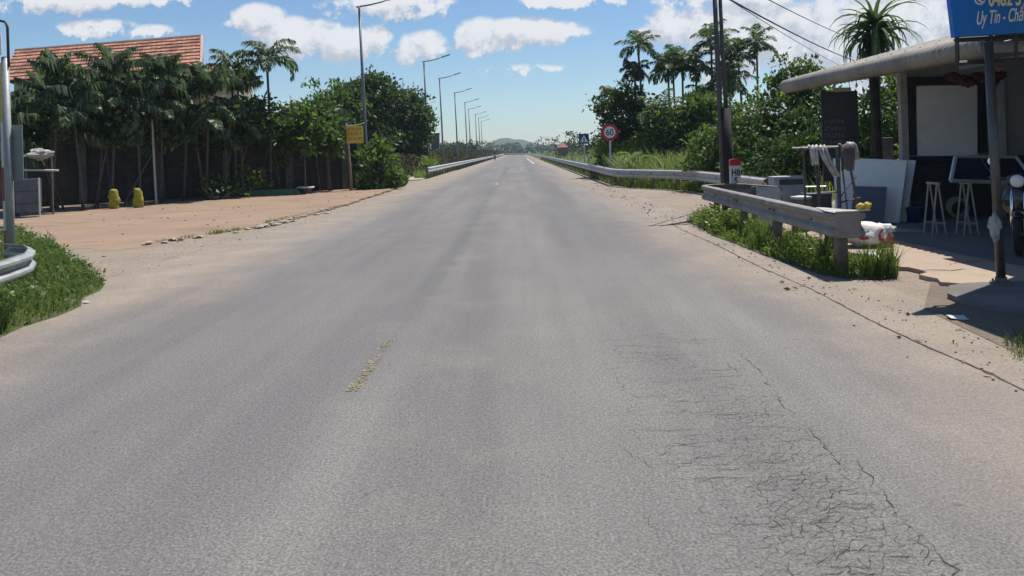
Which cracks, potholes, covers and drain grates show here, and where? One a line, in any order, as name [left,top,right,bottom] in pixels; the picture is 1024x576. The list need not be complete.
crack [601,334,963,576]
